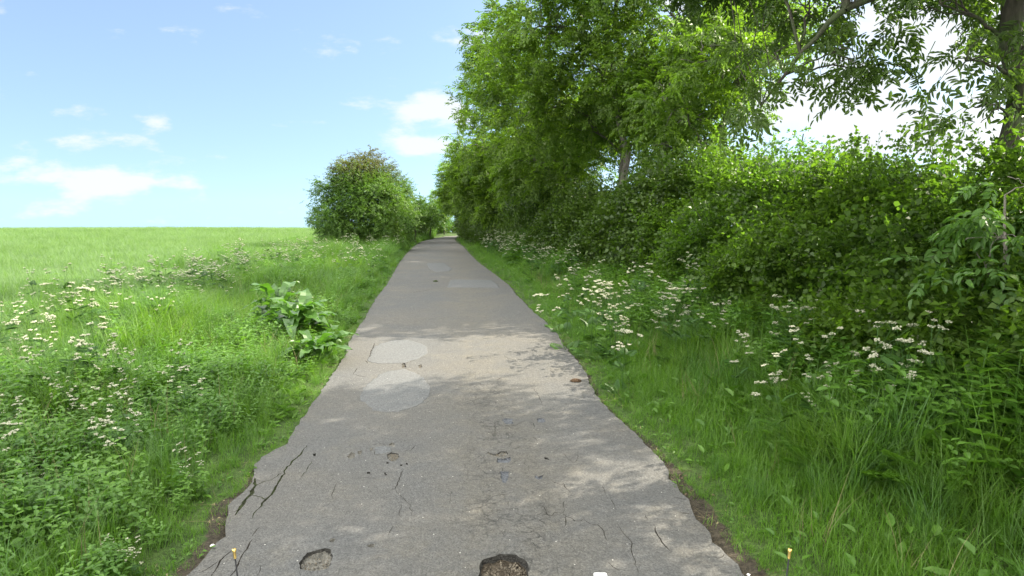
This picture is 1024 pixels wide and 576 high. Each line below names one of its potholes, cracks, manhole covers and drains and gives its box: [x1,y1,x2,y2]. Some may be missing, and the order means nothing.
crack [204,446,312,576]
crack [542,482,669,573]
pothole [299,548,333,571]
crack [331,471,413,535]
pothole [478,554,529,576]
